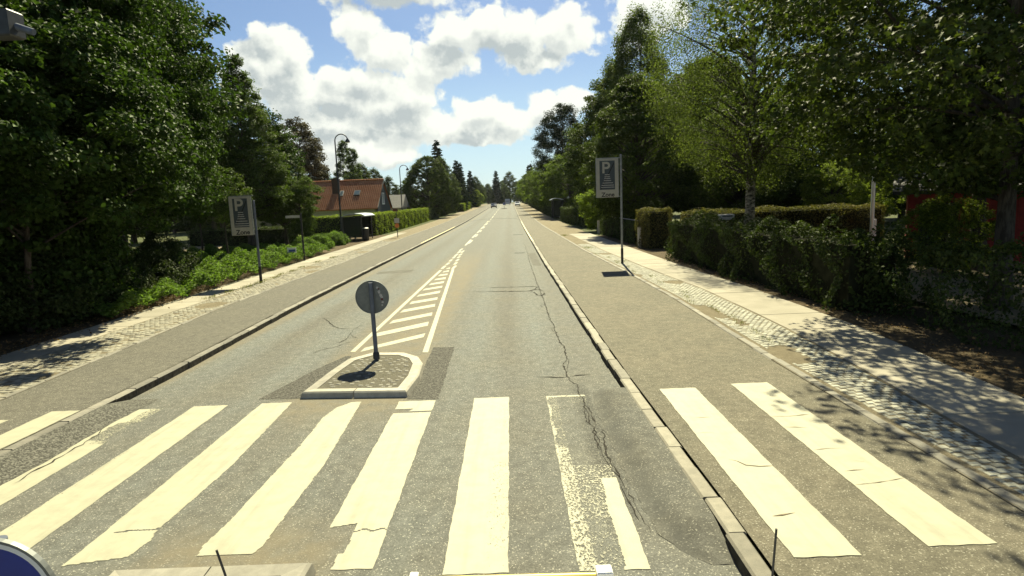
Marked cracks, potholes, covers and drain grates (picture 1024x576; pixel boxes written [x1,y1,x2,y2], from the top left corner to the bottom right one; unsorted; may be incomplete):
crack [486,252,650,528]
crack [21,429,102,480]
